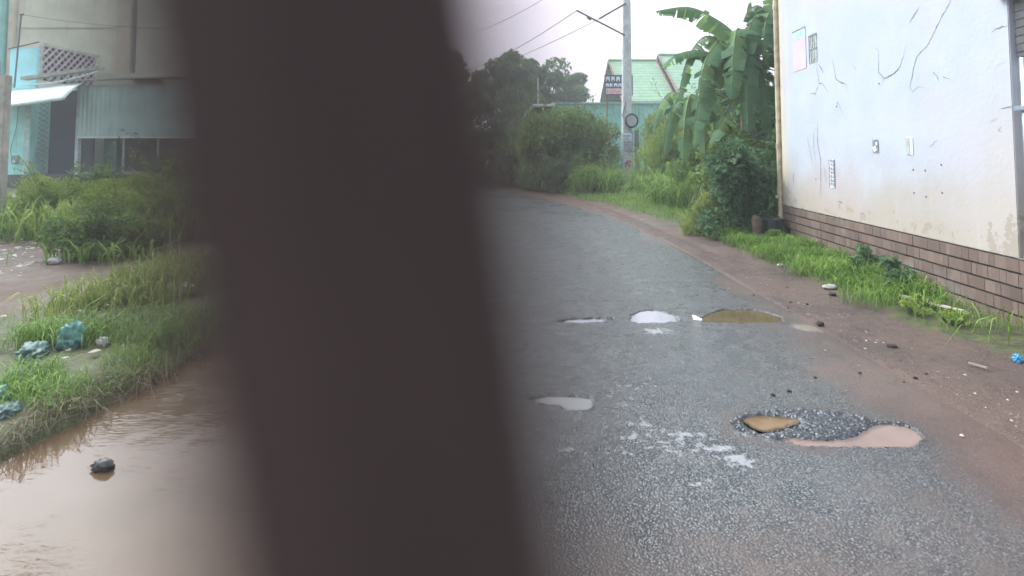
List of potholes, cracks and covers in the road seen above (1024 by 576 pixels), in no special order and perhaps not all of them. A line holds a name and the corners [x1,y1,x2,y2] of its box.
pothole [692,308,790,325]
pothole [587,396,601,412]
pothole [727,406,931,452]
pothole [625,309,683,324]
